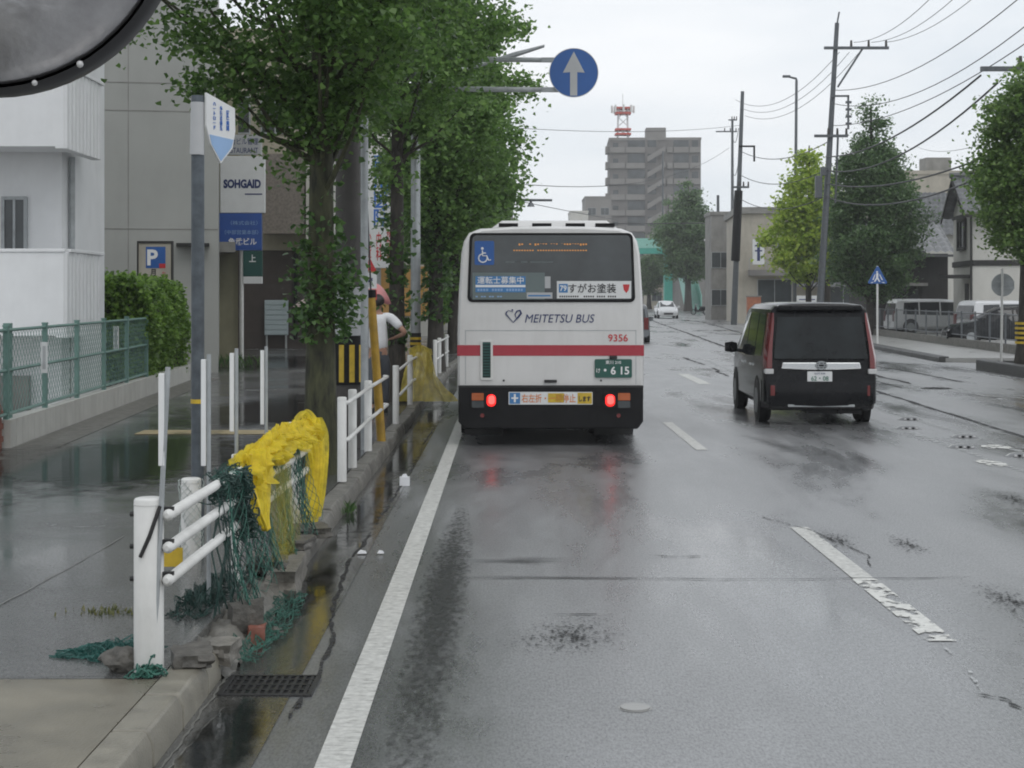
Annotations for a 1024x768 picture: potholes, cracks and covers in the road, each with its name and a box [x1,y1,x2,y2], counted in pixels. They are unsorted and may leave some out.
crack [522,516,937,579]
drain grate [217,675,321,697]
utility cover [618,703,652,712]
crack [939,641,1022,708]
crack [288,531,372,719]
